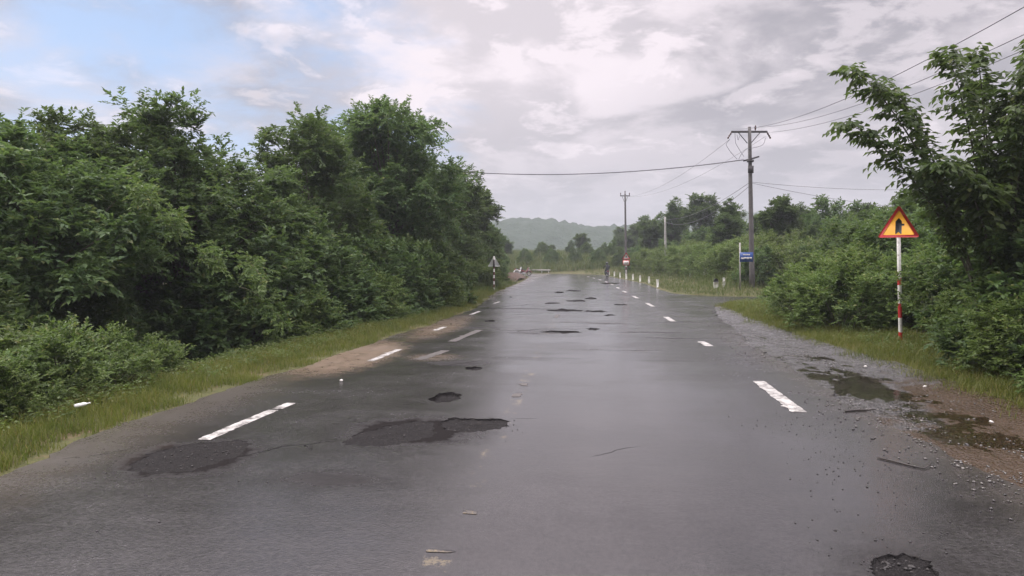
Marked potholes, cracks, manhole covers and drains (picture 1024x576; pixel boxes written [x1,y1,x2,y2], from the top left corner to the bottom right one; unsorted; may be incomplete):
pothole [126,440,251,474]
pothole [428,392,462,403]
pothole [342,421,437,446]
crack [242,441,334,457]
pothole [438,417,510,432]
pothole [869,553,939,576]
